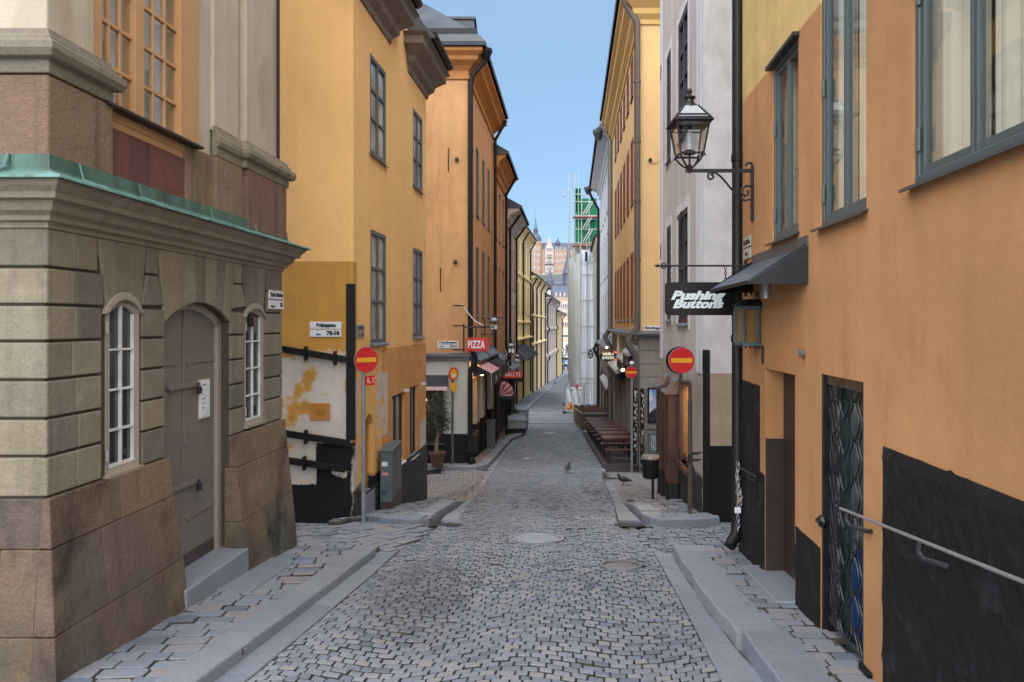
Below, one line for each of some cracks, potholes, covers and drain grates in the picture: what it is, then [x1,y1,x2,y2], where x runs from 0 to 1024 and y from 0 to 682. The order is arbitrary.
manhole cover [600,559,642,572]
manhole cover [508,533,564,545]
